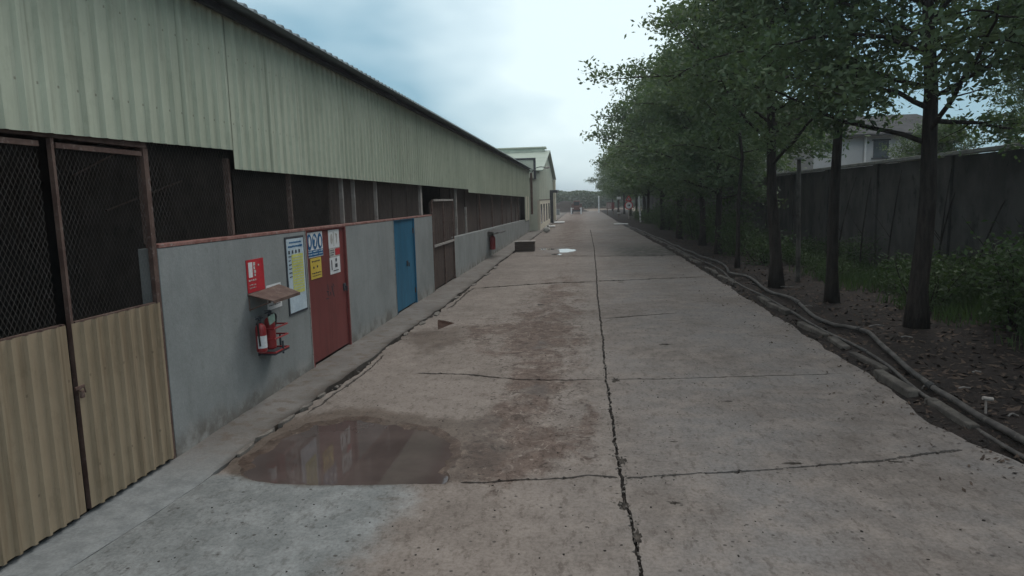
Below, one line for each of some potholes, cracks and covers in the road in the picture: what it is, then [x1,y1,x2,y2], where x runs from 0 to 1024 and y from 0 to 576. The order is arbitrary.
crack [324,289,468,403]
crack [590,230,958,576]
